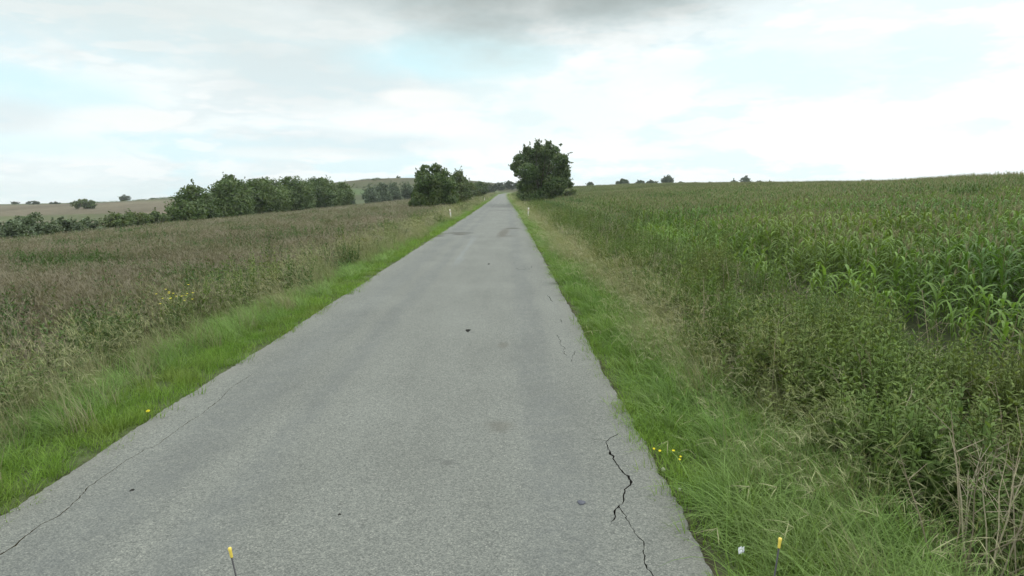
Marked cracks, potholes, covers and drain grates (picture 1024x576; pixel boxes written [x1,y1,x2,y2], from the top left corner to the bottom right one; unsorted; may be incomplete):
crack [590,434,654,576]
crack [0,381,241,555]
